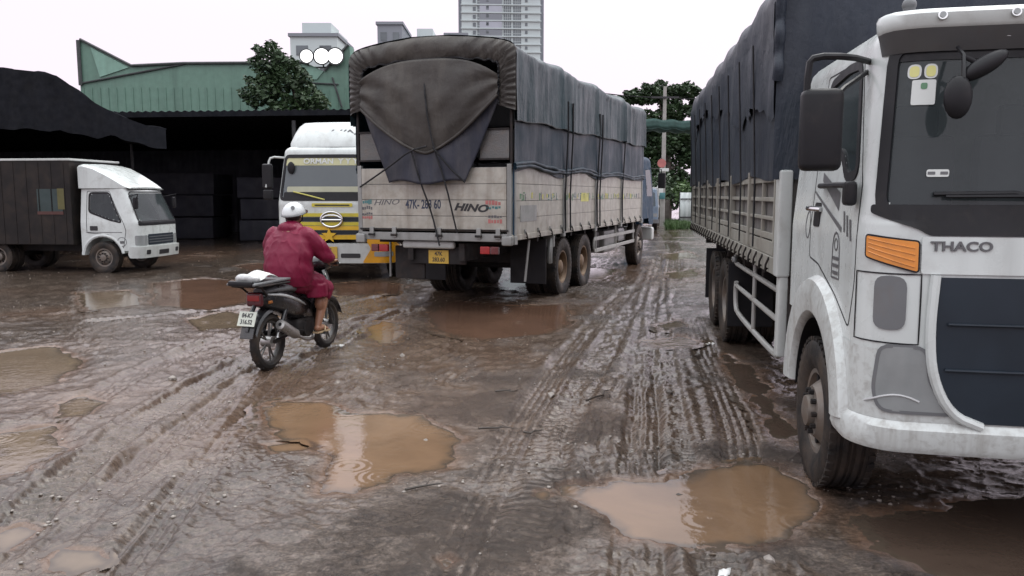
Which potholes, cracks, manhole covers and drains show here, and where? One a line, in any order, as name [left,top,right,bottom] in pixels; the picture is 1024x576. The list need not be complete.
pothole [0,422,72,477]
pothole [356,320,410,344]
pothole [145,277,255,311]
pothole [0,345,89,396]
pothole [0,519,46,553]
pothole [52,393,108,422]
pothole [29,543,119,576]
pothole [422,300,577,343]
pothole [567,457,838,556]
pothole [237,398,469,496]
pothole [845,492,1024,576]
pothole [74,290,144,312]
